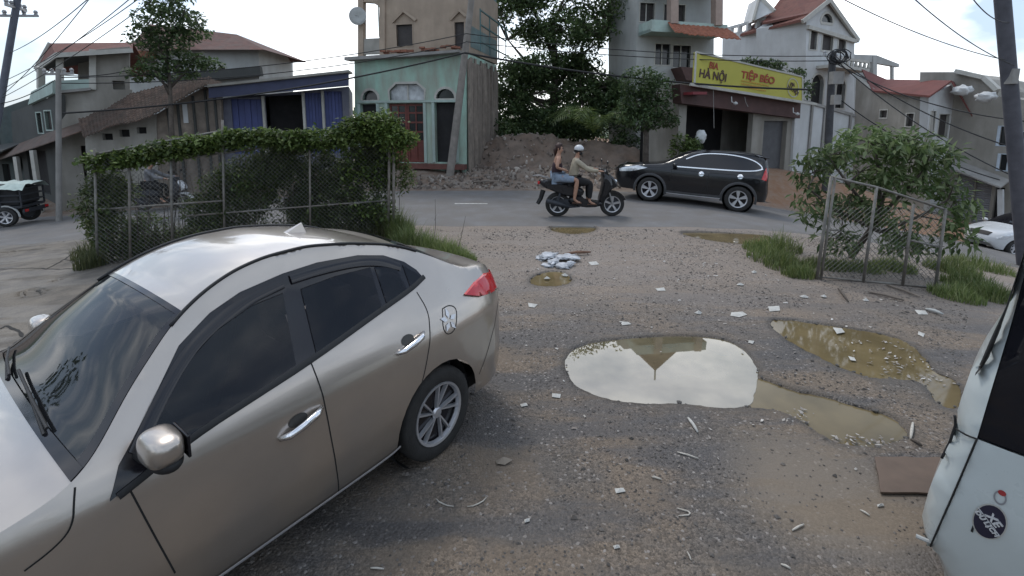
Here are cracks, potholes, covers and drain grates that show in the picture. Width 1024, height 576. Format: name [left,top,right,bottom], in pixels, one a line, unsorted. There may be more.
pothole [744,375,927,457]
pothole [553,331,772,416]
pothole [760,315,967,416]
pothole [522,269,579,289]
pothole [675,230,772,245]
pothole [544,224,601,235]
